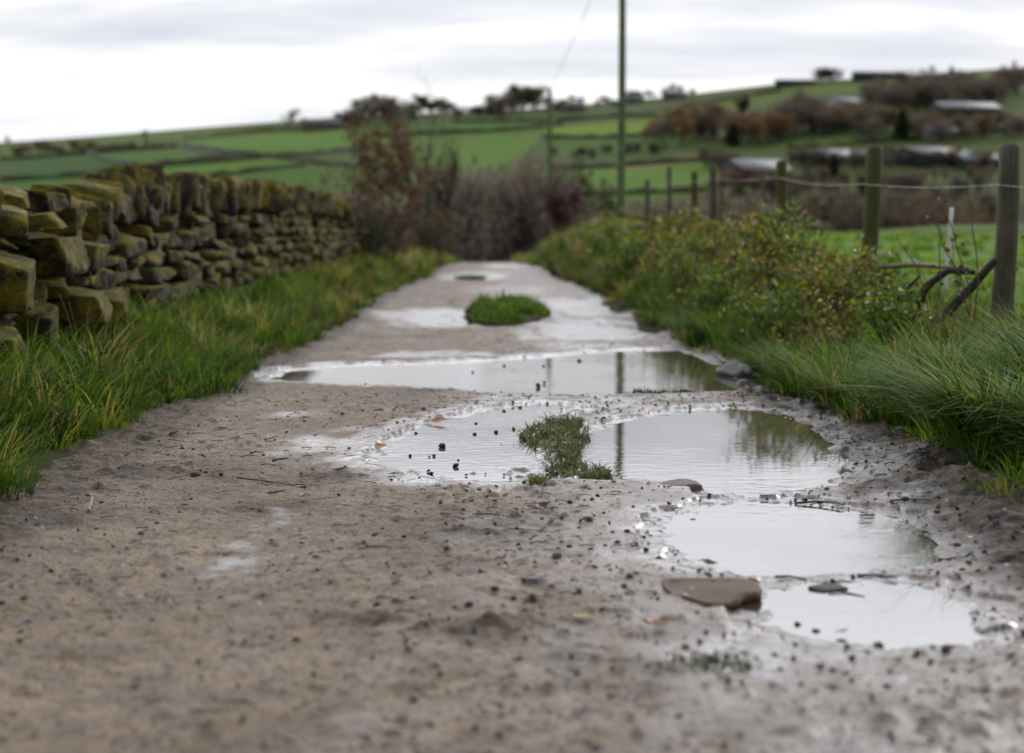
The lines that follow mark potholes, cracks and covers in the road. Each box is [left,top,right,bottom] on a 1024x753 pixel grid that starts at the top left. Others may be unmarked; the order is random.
pothole [421,270,530,281]
pothole [376,307,479,328]
pothole [348,399,599,484]
pothole [618,493,989,582]
pothole [711,572,1024,658]
pothole [517,316,673,340]
pothole [523,296,641,318]
pothole [559,402,905,499]
pothole [249,347,771,395]
